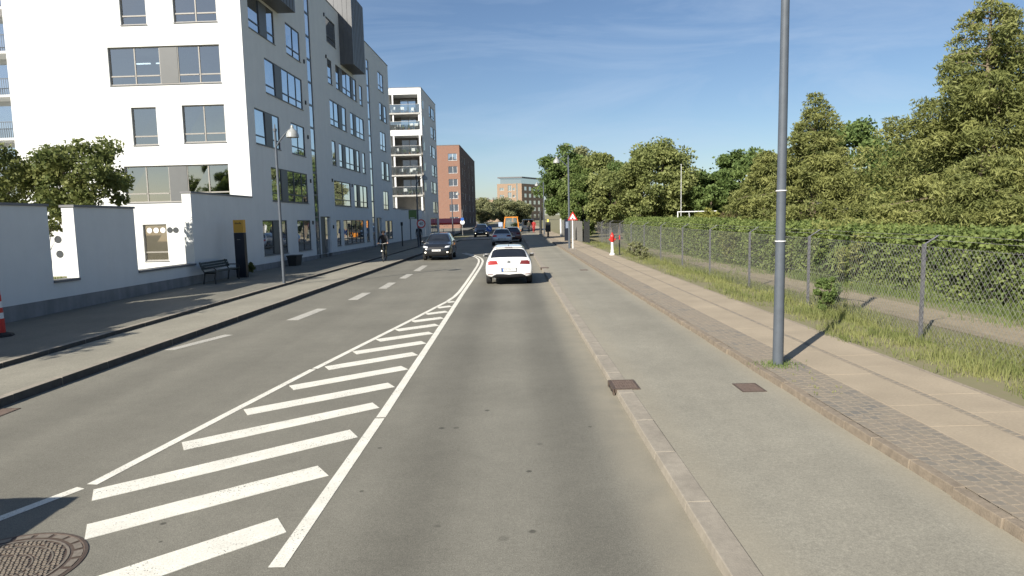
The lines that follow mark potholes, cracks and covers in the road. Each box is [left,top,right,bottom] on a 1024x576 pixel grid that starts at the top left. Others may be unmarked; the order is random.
manhole cover [0,532,89,576]
